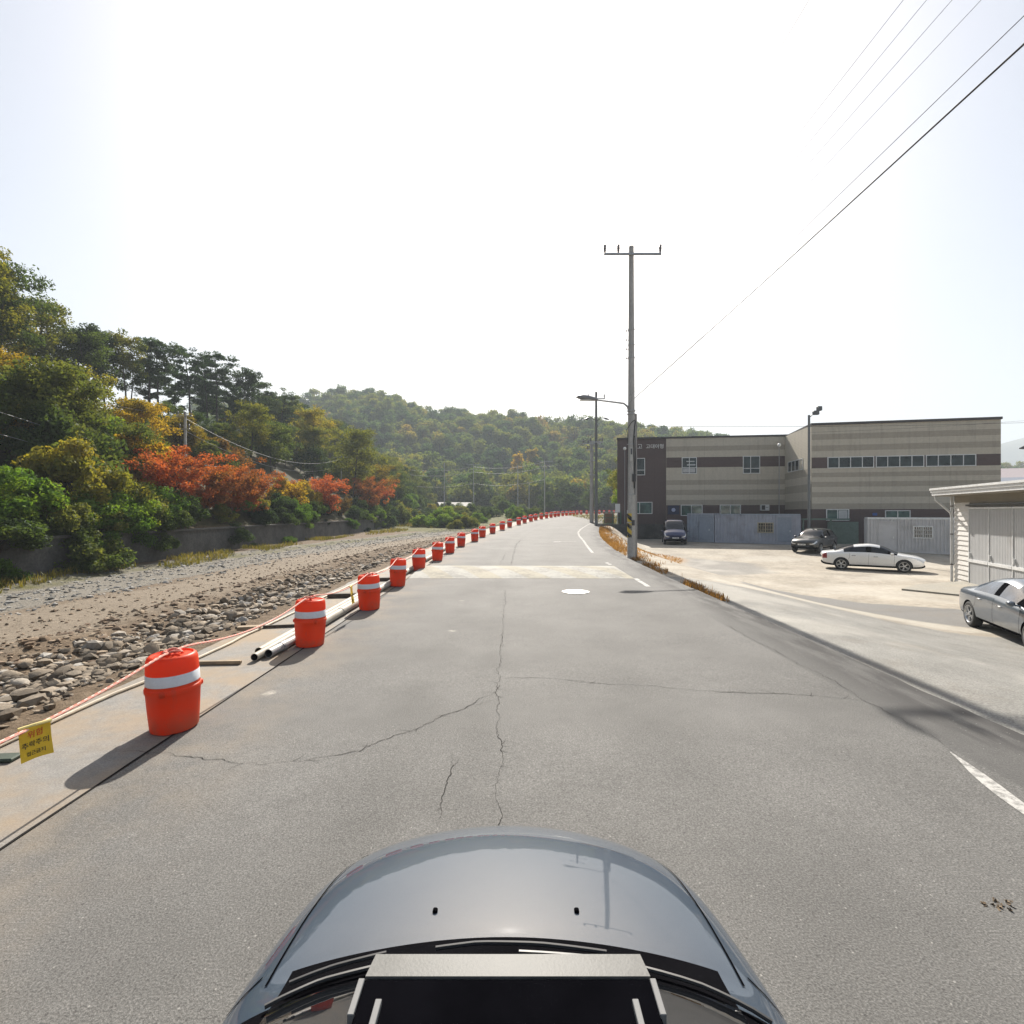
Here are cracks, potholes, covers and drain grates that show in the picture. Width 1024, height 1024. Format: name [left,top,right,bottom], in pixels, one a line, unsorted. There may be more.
crack [122,593,849,826]
